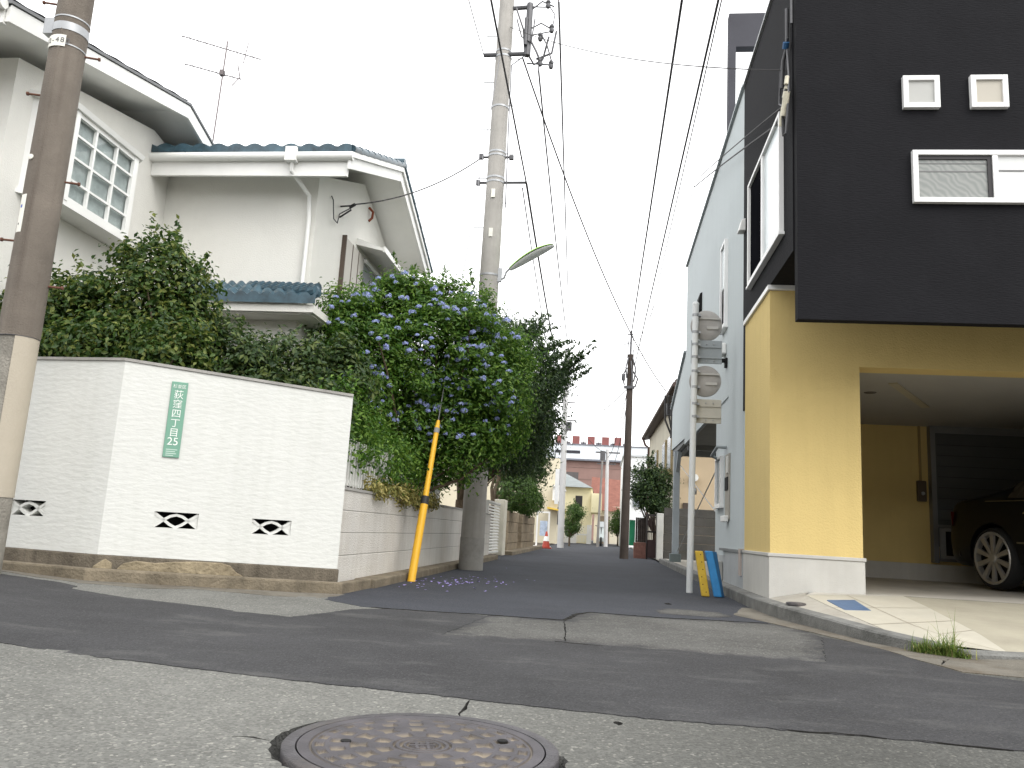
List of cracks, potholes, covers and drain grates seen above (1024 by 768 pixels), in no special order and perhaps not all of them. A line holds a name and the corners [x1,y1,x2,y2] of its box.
crack [371,607,768,646]
manhole cover [279,713,559,768]
